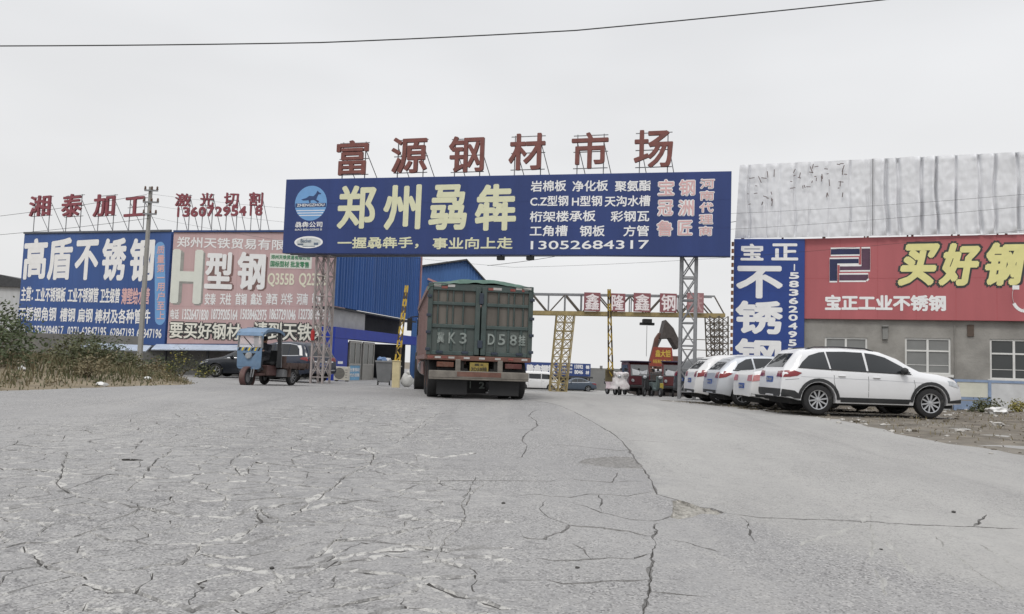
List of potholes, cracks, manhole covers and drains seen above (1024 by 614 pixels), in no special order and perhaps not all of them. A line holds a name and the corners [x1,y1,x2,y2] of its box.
crack [742,514,1022,598]
crack [0,401,735,614]
pothole [670,500,725,519]
